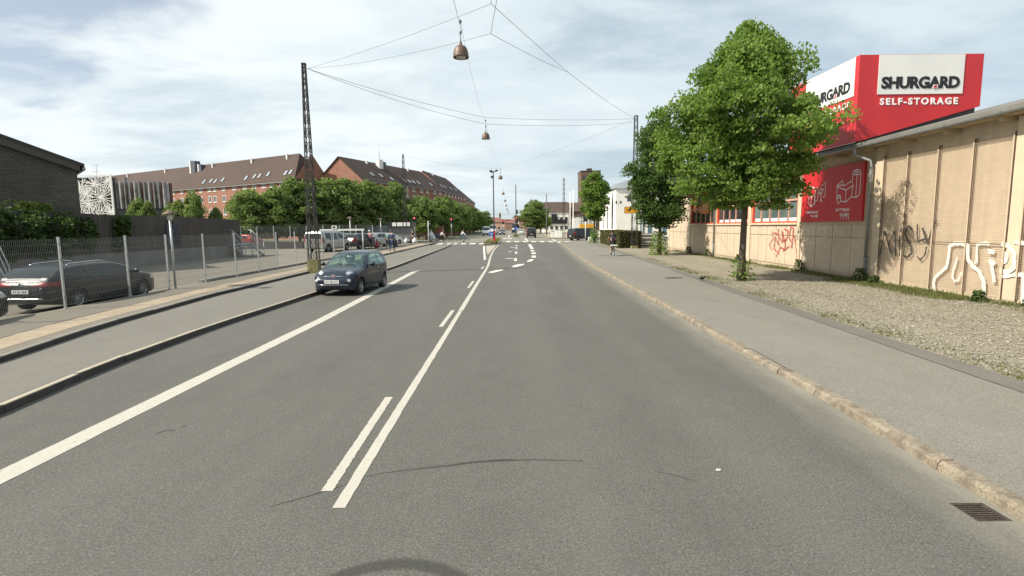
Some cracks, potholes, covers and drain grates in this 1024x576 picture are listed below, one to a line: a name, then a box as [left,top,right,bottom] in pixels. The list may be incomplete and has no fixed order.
drain grate [951,503,1011,521]
crack [270,459,695,507]
